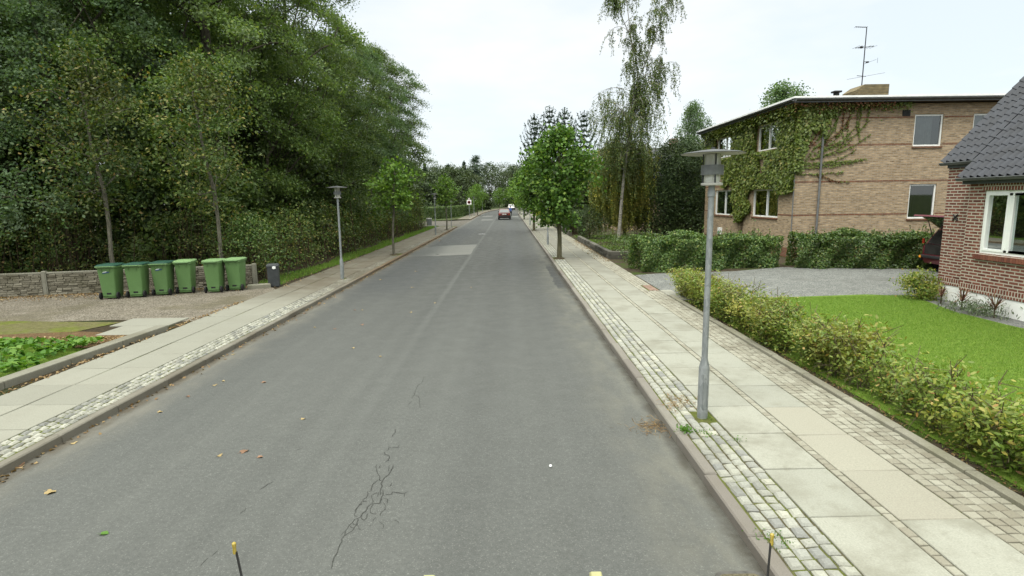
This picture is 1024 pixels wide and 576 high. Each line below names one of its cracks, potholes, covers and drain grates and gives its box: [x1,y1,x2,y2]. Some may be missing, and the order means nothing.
crack [331,430,406,569]
